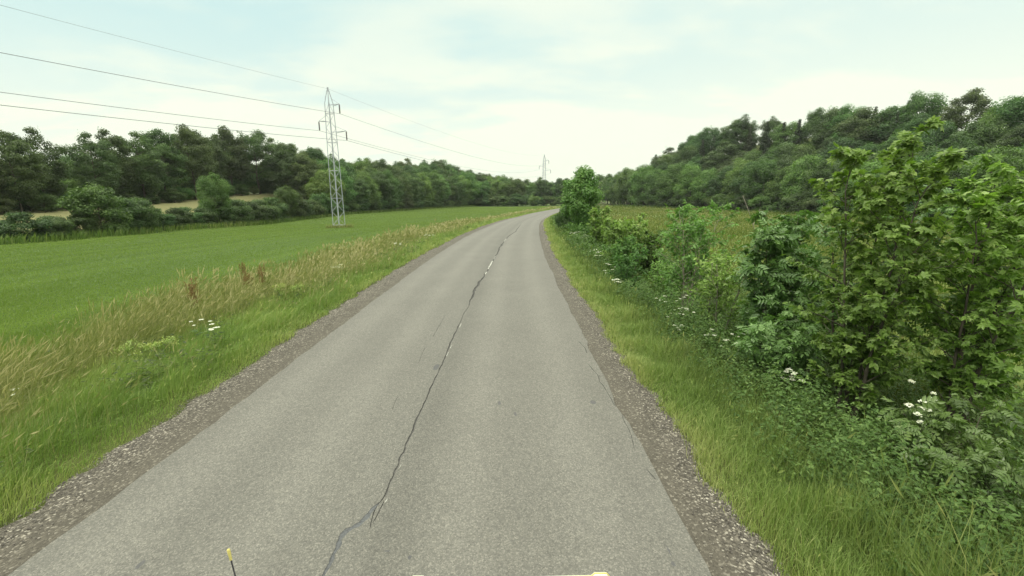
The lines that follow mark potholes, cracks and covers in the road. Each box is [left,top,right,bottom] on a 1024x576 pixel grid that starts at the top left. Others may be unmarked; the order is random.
crack [322,227,519,576]
